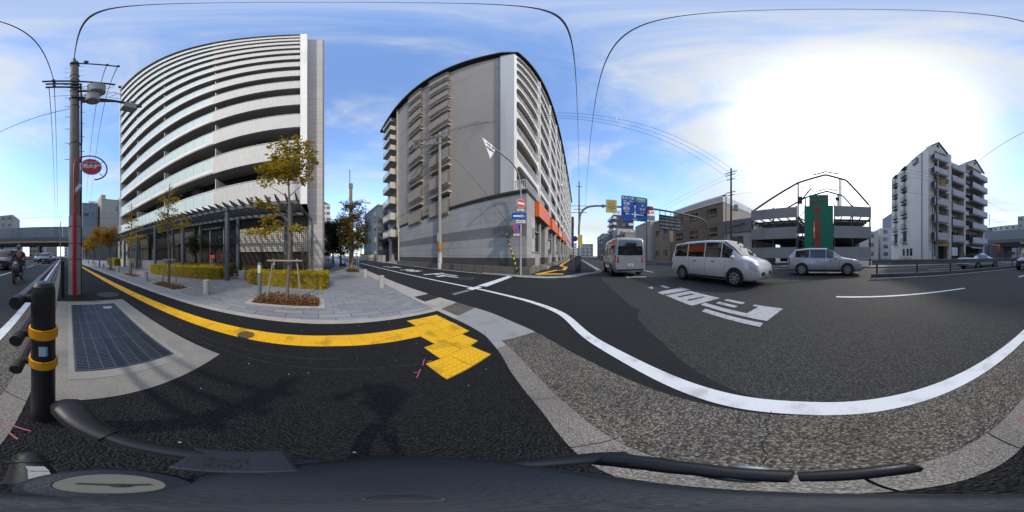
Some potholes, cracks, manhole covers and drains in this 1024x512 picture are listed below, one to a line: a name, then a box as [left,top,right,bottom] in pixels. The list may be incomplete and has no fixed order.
drain grate [56,299,220,401]
crack [747,411,772,467]
